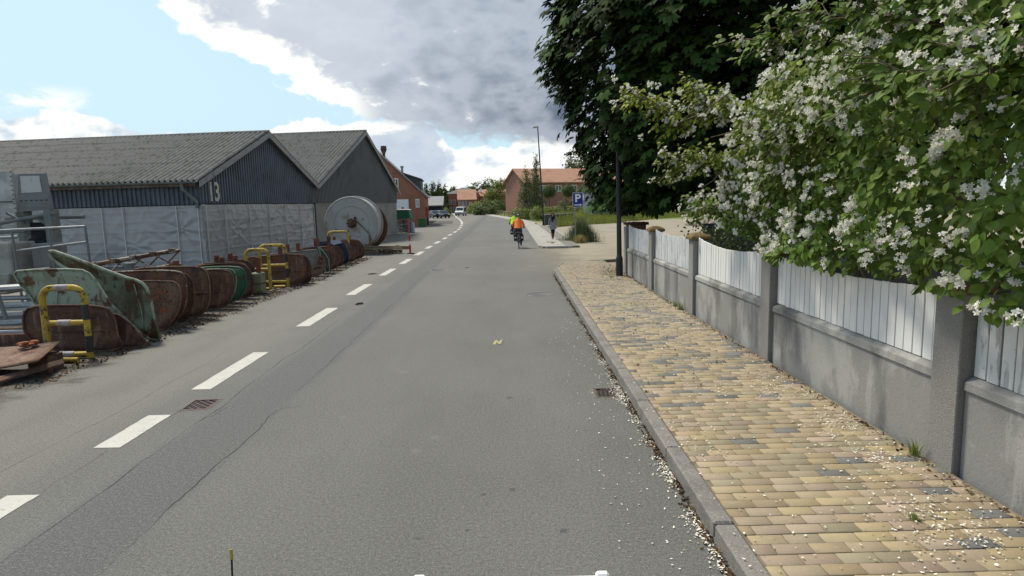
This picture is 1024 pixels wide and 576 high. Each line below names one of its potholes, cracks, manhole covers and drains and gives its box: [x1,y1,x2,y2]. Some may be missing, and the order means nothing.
drain grate [590,387,625,398]
drain grate [177,398,224,411]
